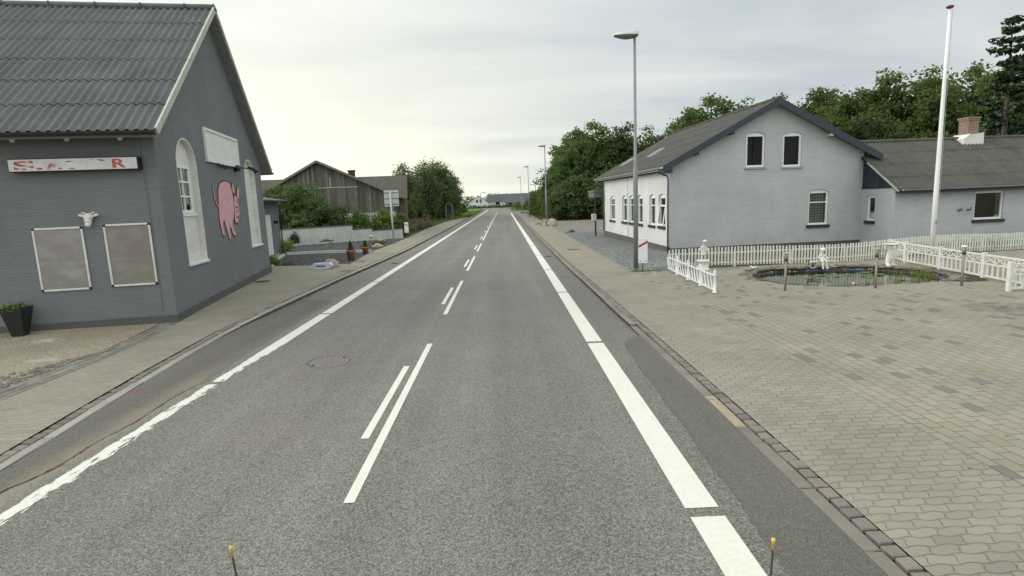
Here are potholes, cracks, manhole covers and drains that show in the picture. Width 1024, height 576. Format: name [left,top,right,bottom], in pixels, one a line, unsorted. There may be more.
manhole cover [306,355,353,368]
